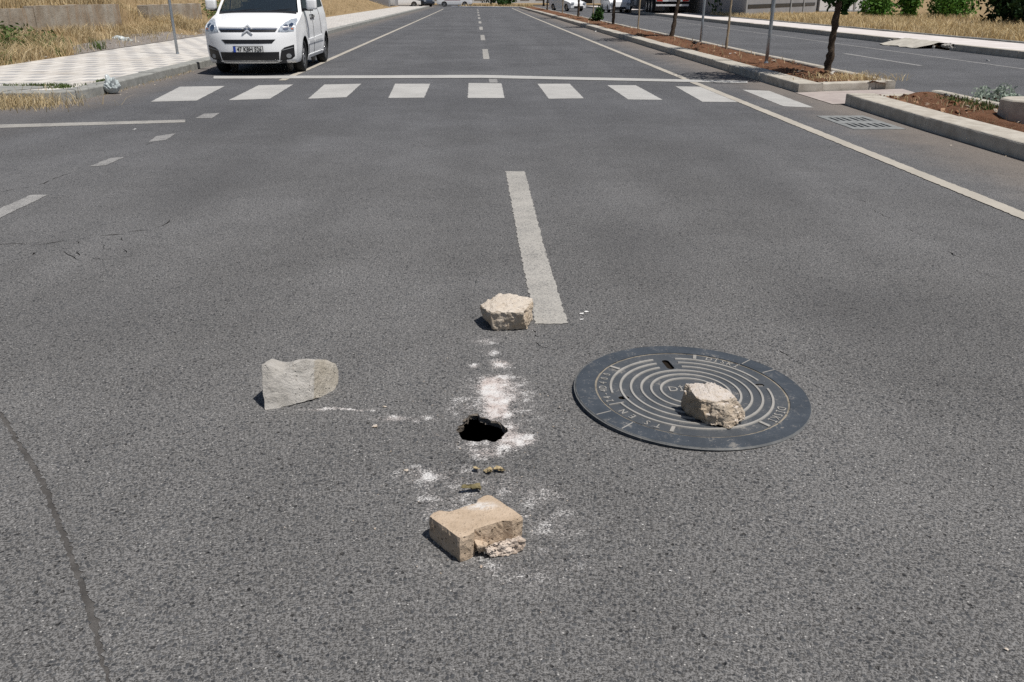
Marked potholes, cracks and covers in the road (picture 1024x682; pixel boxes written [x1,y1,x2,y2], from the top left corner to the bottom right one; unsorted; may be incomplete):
manhole cover [574,346,812,451]
pothole [456,413,508,442]
drain grate [817,115,905,130]
crack [0,220,170,260]
crack [0,412,110,682]
